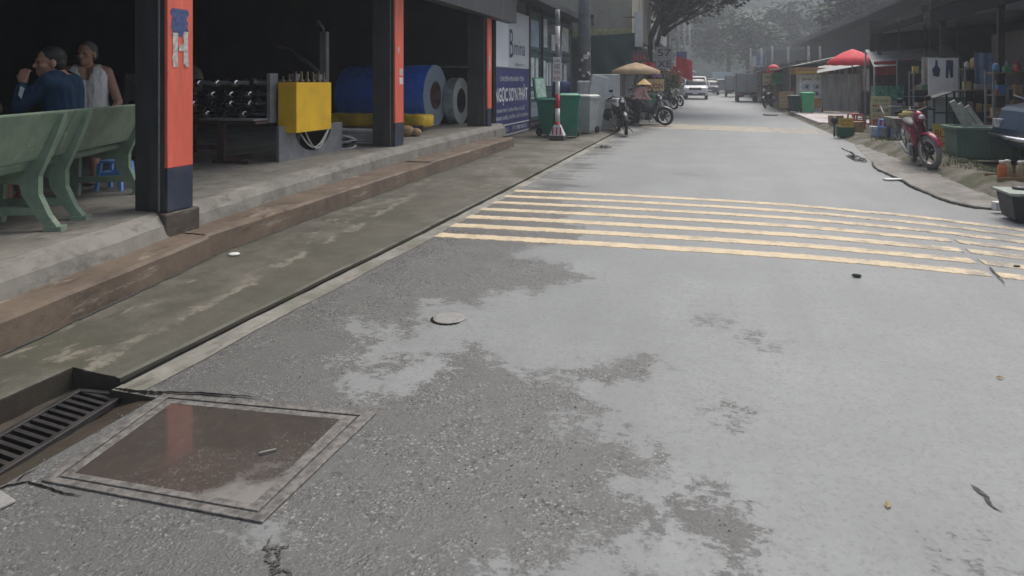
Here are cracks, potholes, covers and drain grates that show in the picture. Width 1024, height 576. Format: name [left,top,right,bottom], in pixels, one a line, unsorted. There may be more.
crack [114,388,263,398]
manhole cover [41,394,376,524]
crack [262,536,292,576]
manhole cover [430,312,466,325]
crack [0,469,81,496]
crack [971,484,1001,511]
drain grate [0,388,120,475]
